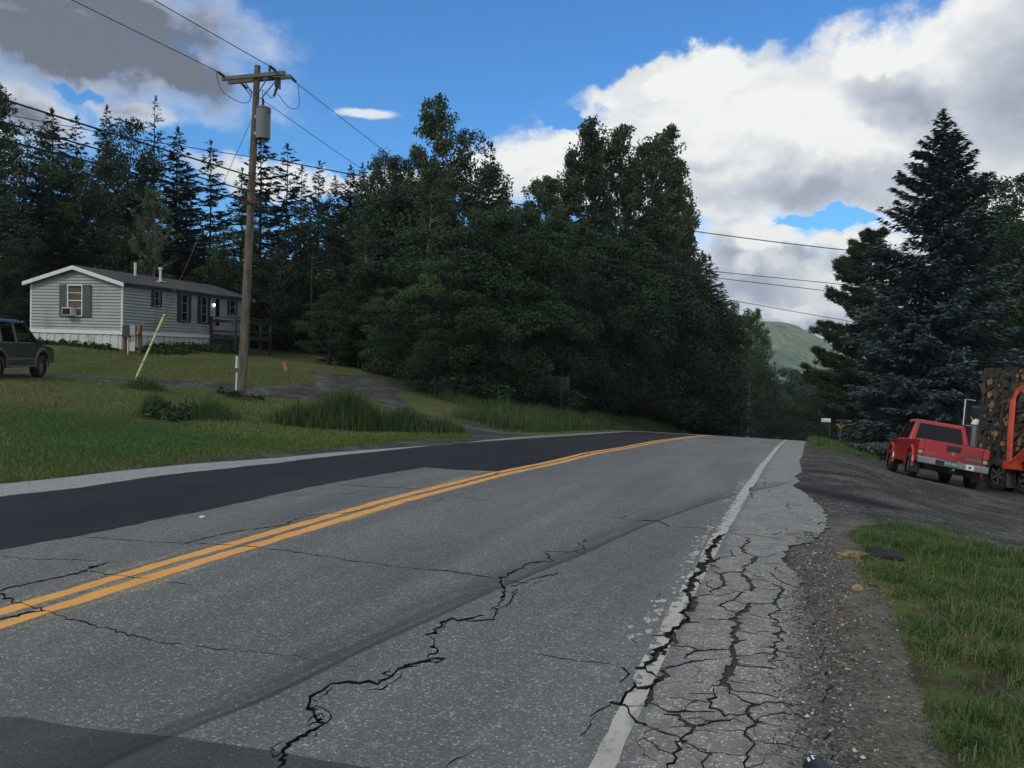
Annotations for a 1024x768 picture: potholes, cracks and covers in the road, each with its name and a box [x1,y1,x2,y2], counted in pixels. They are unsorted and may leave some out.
crack [0,509,823,768]
crack [749,478,827,525]
